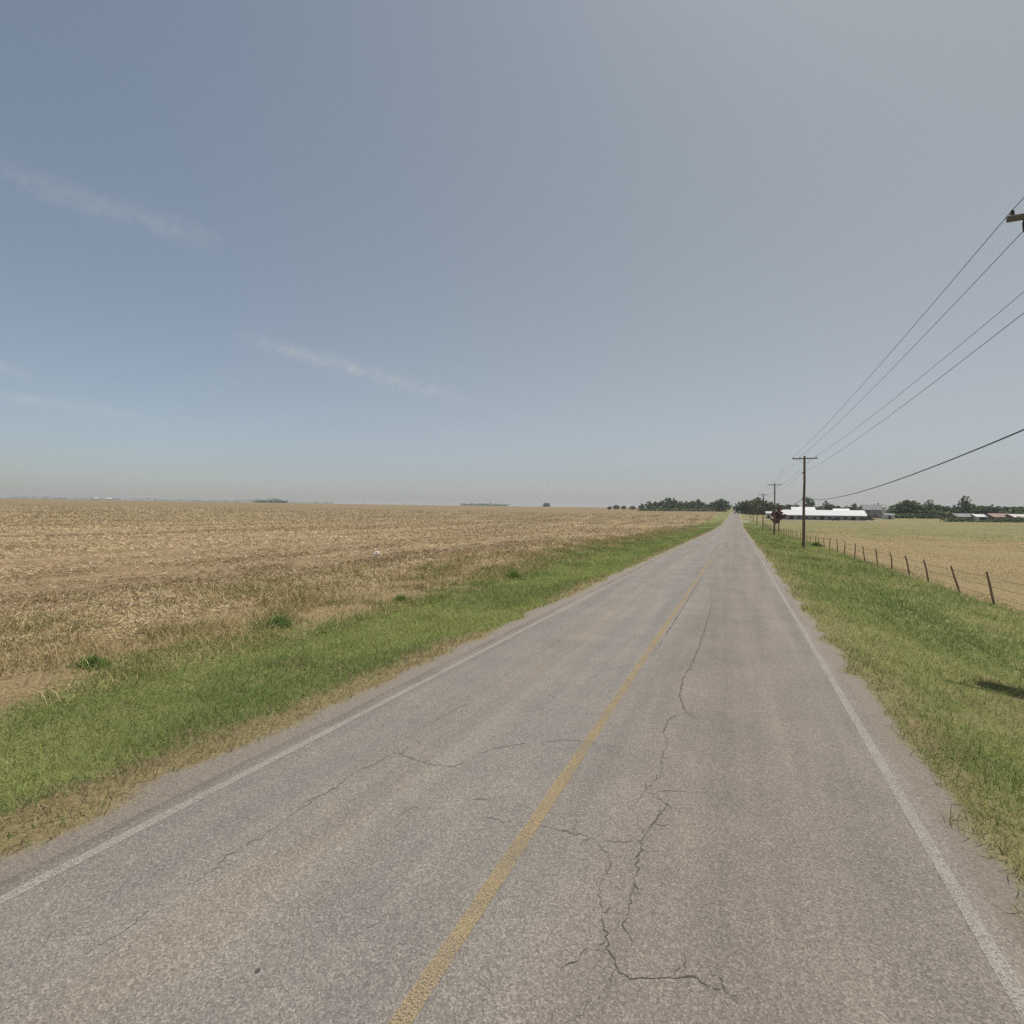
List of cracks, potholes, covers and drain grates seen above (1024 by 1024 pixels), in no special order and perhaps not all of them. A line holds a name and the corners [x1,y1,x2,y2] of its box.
crack [529,604,740,1004]
crack [350,738,598,775]
crack [200,779,345,879]
